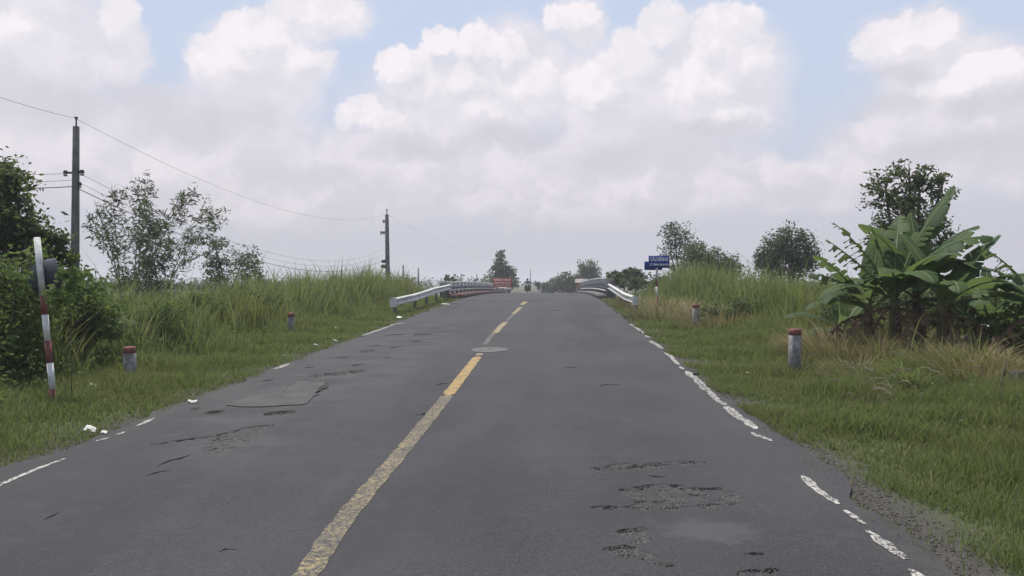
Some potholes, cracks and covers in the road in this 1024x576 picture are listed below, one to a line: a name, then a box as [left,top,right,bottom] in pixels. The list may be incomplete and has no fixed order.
pothole [308,370,365,378]
crack [146,424,277,476]
